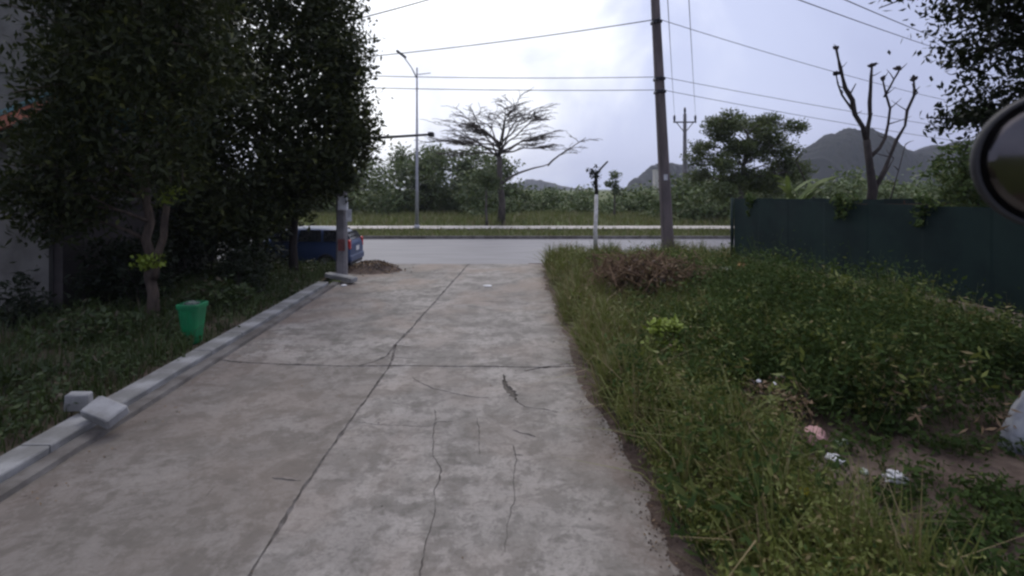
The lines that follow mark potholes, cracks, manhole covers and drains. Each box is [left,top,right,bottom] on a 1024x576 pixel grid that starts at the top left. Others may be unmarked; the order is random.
crack [358,378,490,576]
crack [504,430,536,552]
